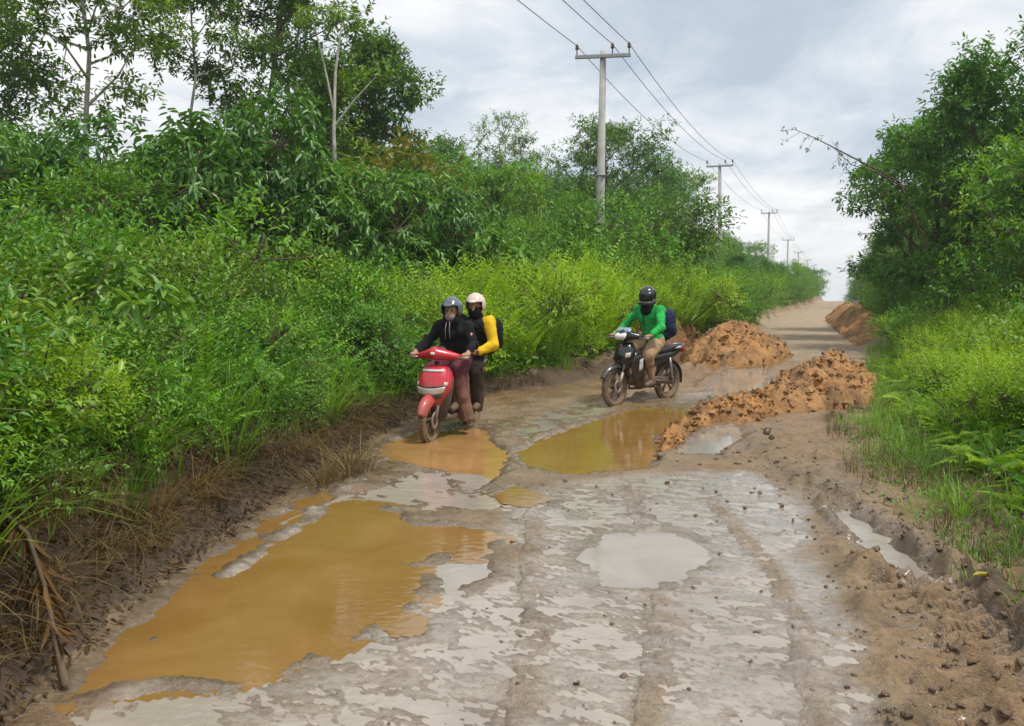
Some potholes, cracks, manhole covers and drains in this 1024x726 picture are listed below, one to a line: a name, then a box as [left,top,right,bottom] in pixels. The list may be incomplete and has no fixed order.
pothole [31,499,516,715]
pothole [507,405,688,476]
pothole [487,482,565,510]
pothole [570,528,719,596]
pothole [816,497,965,590]
pothole [369,423,520,492]
